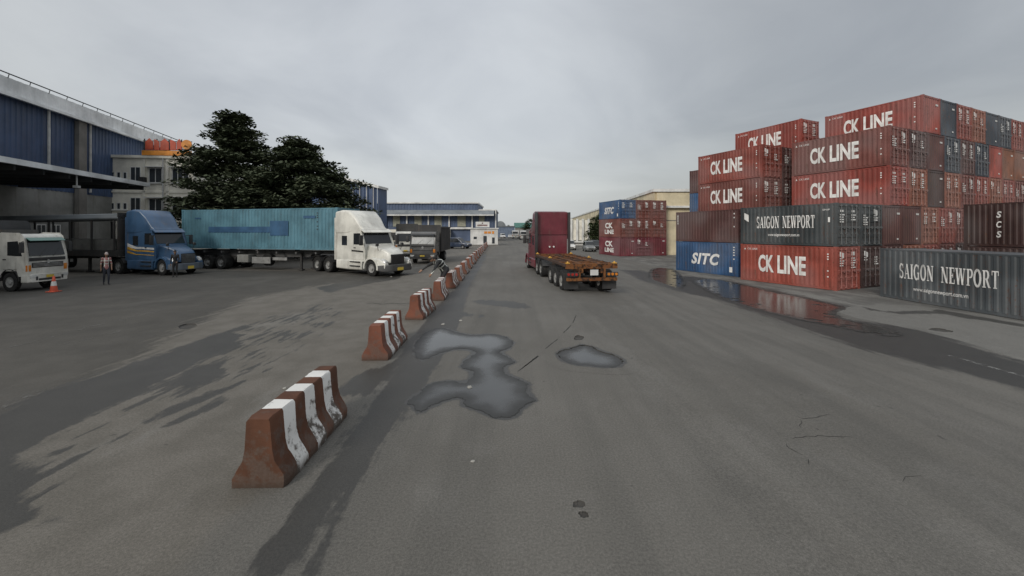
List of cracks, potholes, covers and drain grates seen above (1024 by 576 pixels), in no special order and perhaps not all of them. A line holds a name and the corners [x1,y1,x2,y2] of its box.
pothole [539,340,644,375]
pothole [569,498,589,510]
pothole [574,509,593,521]
crack [786,414,847,464]
